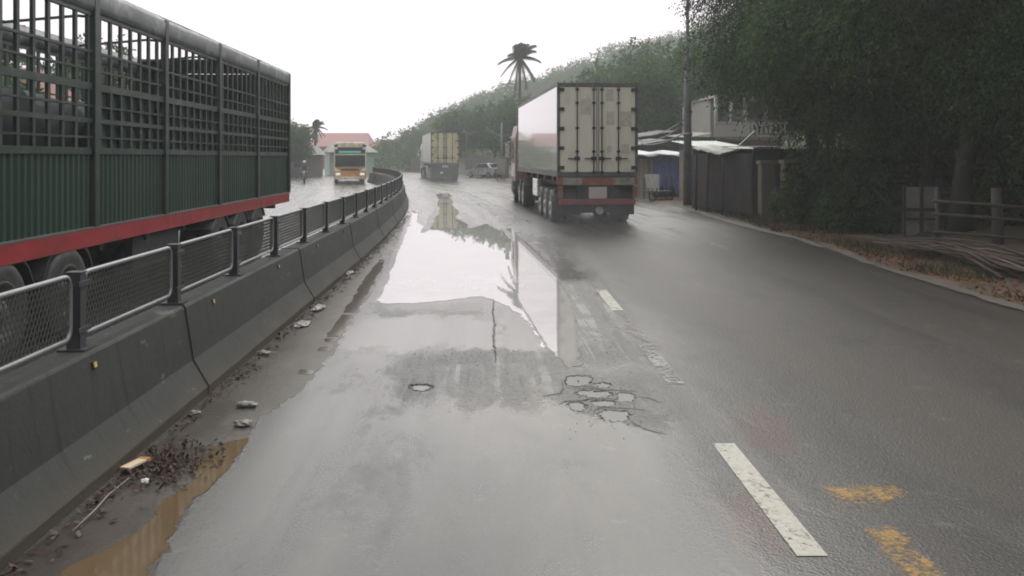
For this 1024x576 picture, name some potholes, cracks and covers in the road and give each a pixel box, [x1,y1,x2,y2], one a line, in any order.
pothole [407,383,435,392]
pothole [616,392,637,403]
crack [547,382,665,434]
pothole [595,409,633,422]
pothole [574,389,615,398]
pothole [566,401,588,412]
pothole [563,375,594,386]
